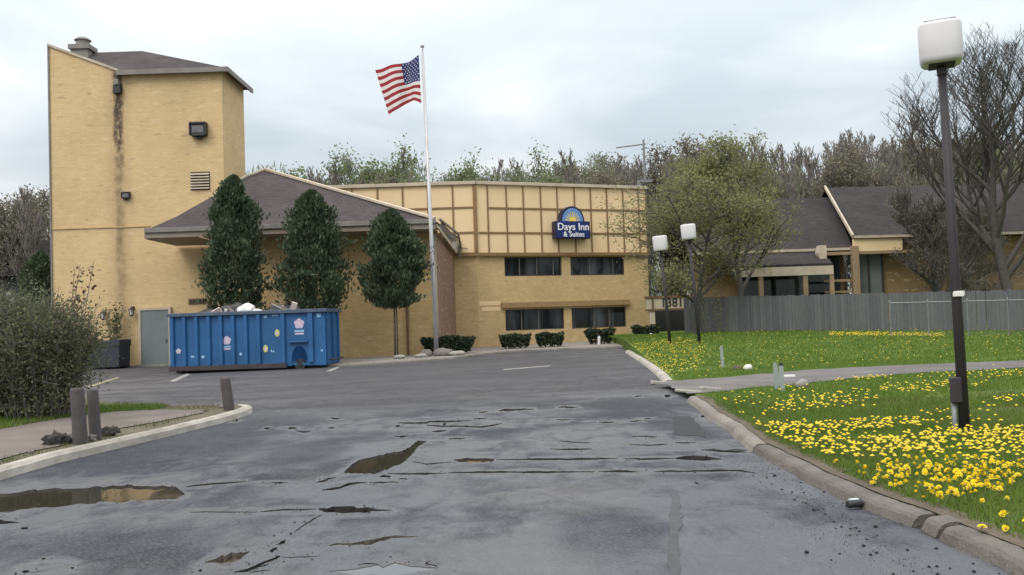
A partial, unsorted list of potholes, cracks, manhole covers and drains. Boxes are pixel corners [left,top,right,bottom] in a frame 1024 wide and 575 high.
pothole [205,551,249,564]
pothole [0,484,184,512]
crack [395,408,531,439]
pothole [344,440,426,473]
